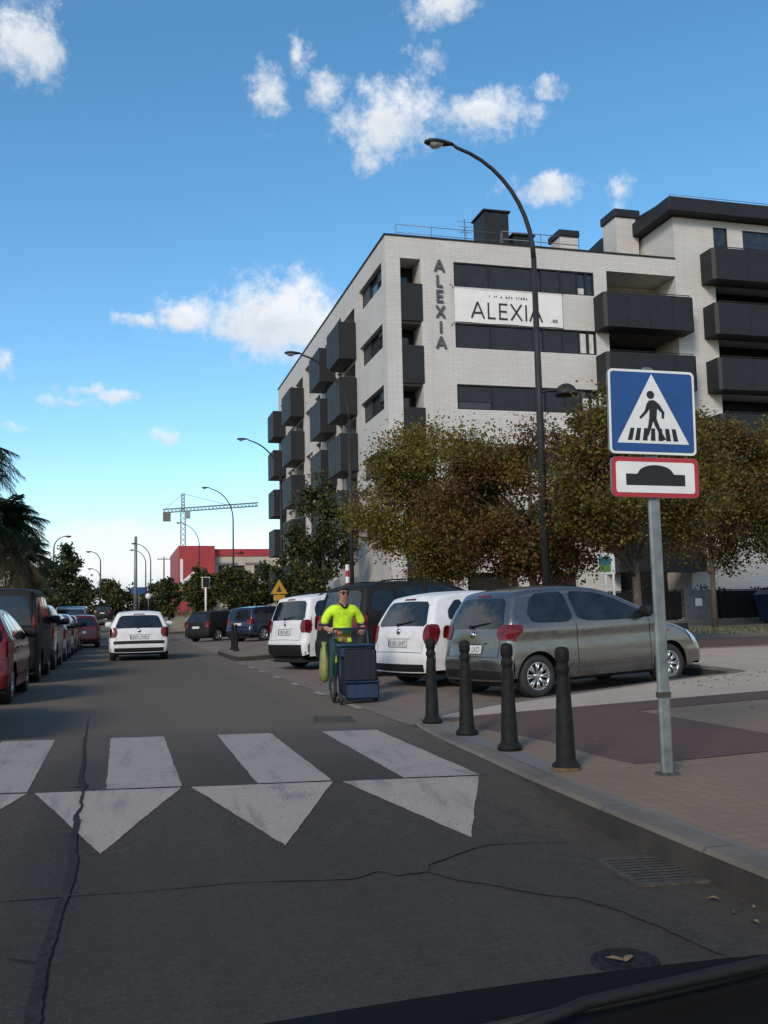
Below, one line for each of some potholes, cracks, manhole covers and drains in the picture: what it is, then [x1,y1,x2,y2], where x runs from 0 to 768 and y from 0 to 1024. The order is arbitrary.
crack [0,841,732,958]
drain grate [596,855,710,888]
manhole cover [591,948,660,972]
